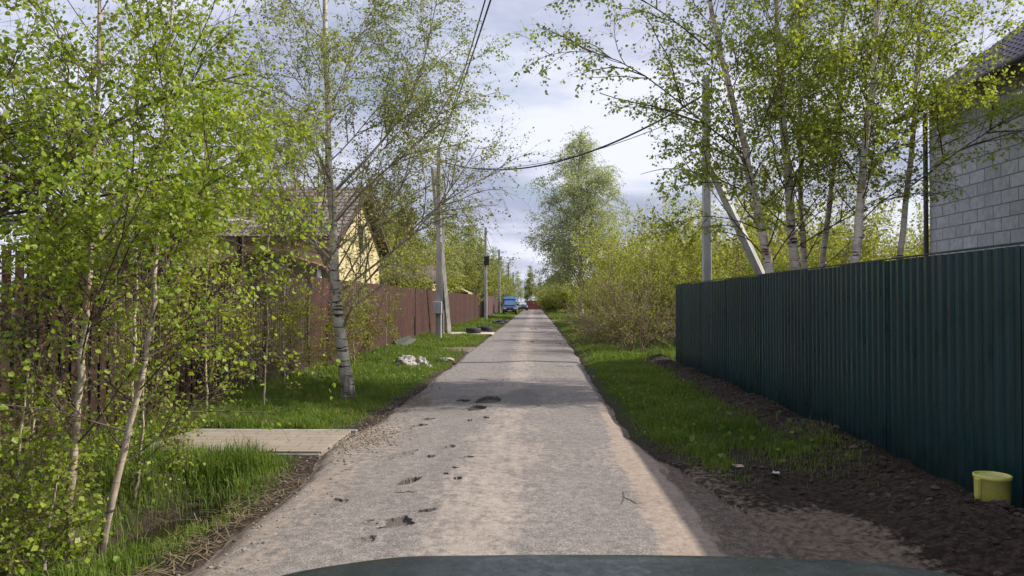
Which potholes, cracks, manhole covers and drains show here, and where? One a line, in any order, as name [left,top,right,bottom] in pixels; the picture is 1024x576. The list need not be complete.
pothole [389,474,429,489]
pothole [363,514,421,531]
pothole [472,396,504,405]
